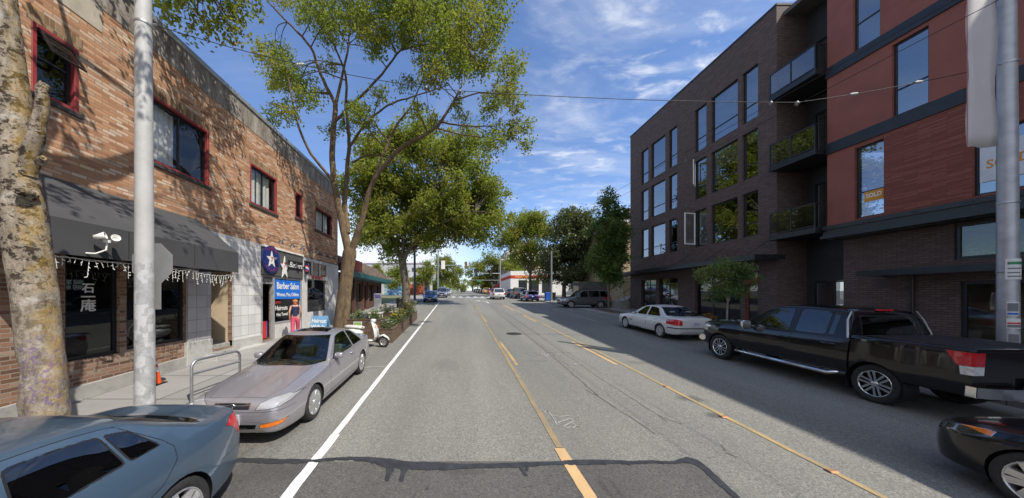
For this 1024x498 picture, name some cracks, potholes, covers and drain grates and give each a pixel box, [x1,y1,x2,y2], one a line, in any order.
crack [492,308,680,434]
